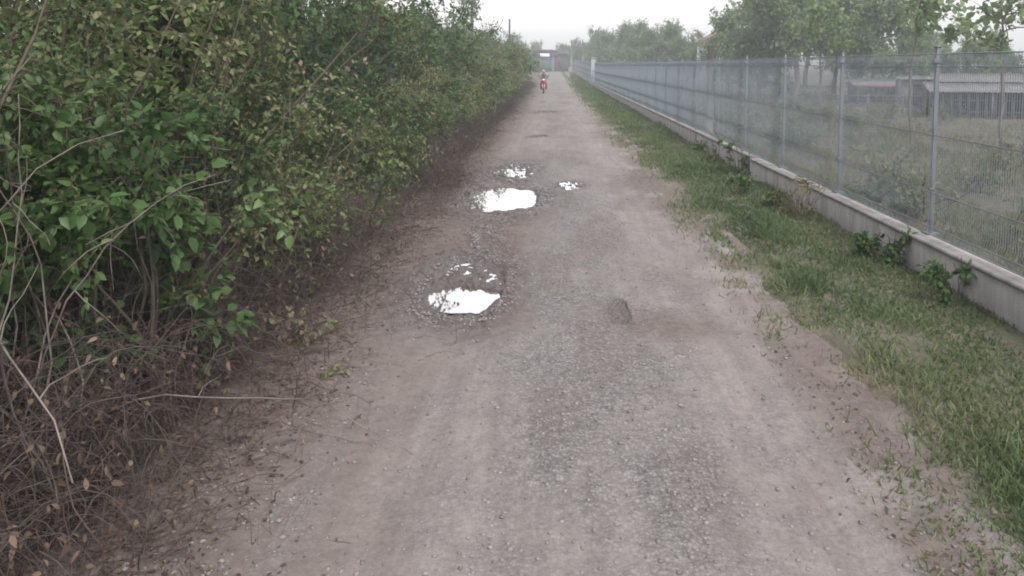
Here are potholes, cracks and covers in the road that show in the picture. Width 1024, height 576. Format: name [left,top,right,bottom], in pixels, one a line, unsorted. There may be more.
pothole [607,297,633,327]
pothole [482,162,538,183]
pothole [420,259,515,320]
pothole [552,181,588,190]
pothole [459,186,544,216]
